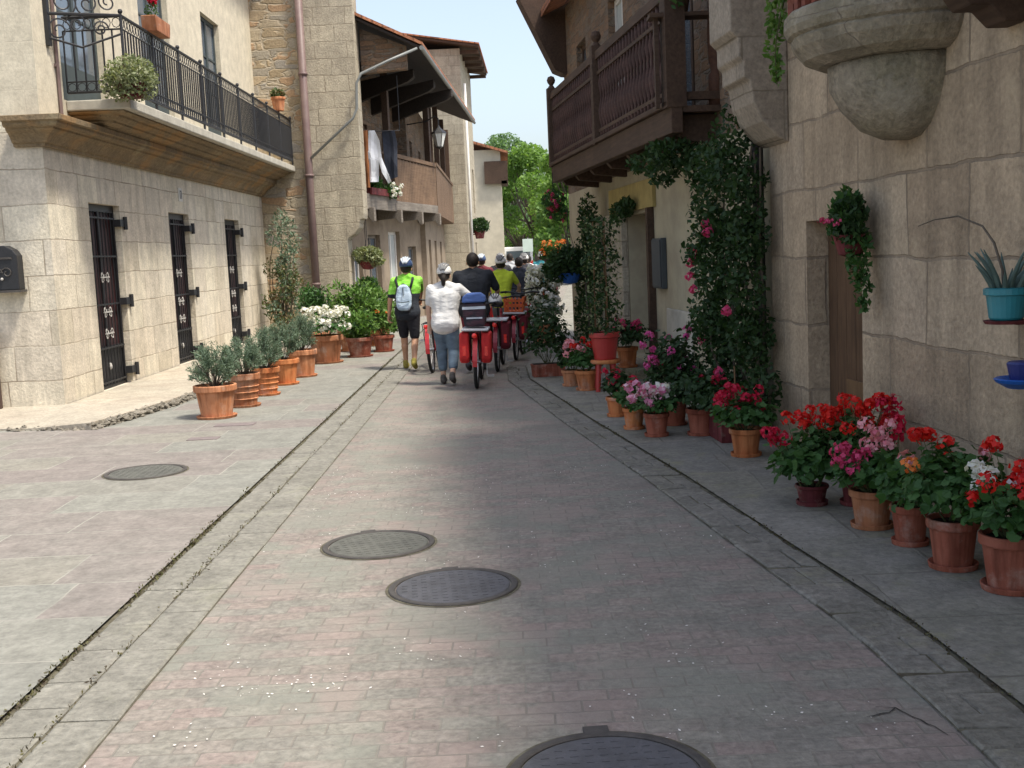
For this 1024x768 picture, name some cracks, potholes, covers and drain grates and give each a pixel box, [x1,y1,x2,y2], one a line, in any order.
crack [867,706,948,735]
manhole cover [320,529,437,560]
manhole cover [101,464,189,481]
manhole cover [385,566,521,607]
manhole cover [506,725,716,768]
